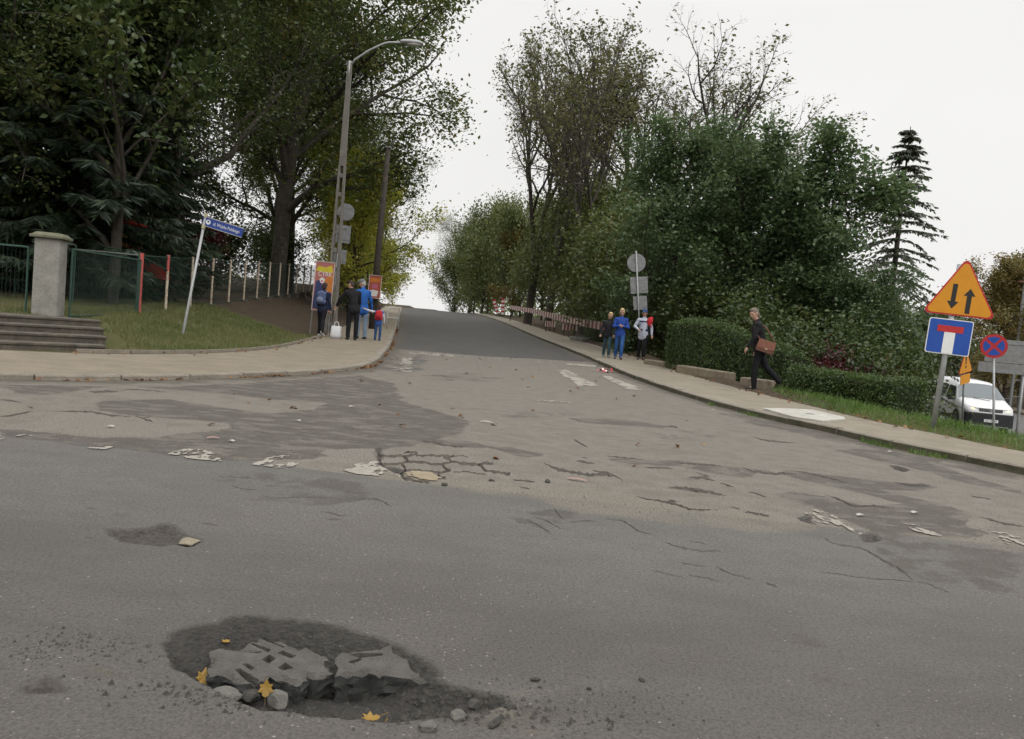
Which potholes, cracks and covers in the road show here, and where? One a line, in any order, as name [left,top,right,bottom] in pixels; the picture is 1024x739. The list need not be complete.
crack [0,399,34,417]
crack [972,496,1021,527]
crack [218,439,888,588]
crack [56,410,153,423]
crack [822,538,948,592]
pothole [159,614,514,723]
